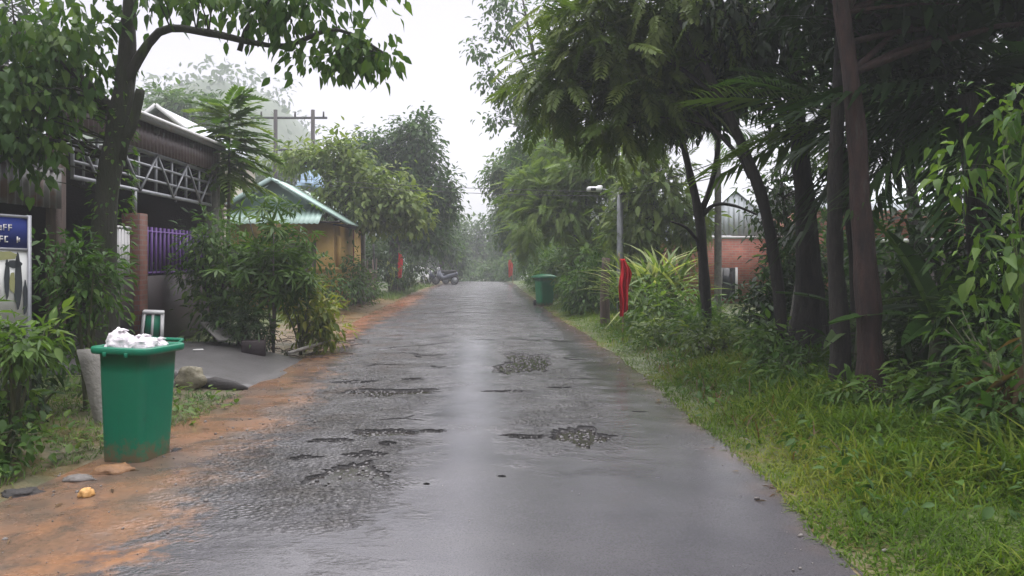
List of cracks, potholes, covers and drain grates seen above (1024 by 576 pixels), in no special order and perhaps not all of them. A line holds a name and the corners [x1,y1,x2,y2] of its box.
pothole [339,388,440,398]
pothole [548,426,617,449]
pothole [352,428,419,437]
pothole [492,353,555,375]
pothole [341,450,388,461]
pothole [300,460,392,487]
